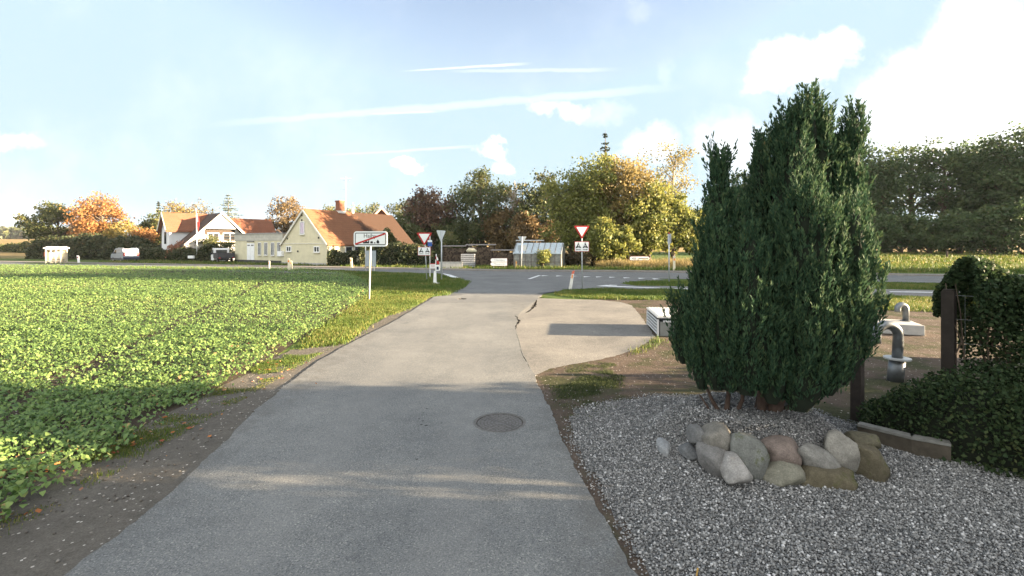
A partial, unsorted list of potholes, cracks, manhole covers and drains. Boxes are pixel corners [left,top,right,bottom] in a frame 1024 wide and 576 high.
manhole cover [473,413,526,433]
crack [515,301,537,366]
